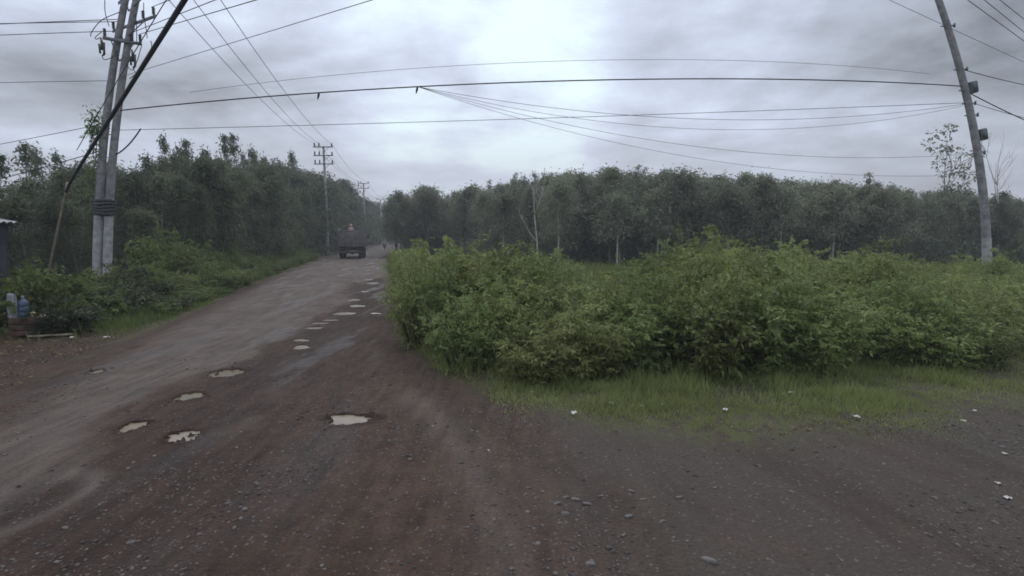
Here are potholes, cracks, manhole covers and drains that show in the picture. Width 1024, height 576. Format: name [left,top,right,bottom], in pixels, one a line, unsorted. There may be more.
pothole [199,366,253,380]
pothole [163,390,214,403]
pothole [78,367,108,375]
pothole [154,427,207,446]
pothole [111,419,162,435]
pothole [315,410,388,428]
